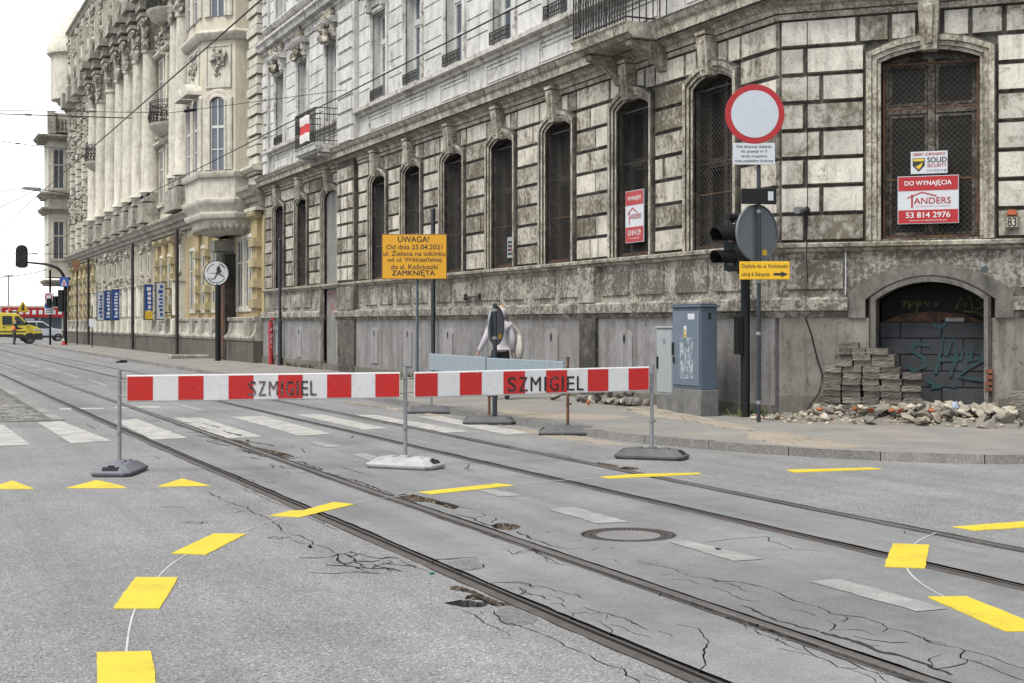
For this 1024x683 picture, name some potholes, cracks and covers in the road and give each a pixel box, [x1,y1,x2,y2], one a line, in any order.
crack [206,491,1022,683]
manhole cover [580,527,677,542]
pothole [450,586,510,607]
pothole [445,600,491,612]
pothole [490,523,521,533]
pothole [397,494,460,509]
pothole [247,445,294,458]
